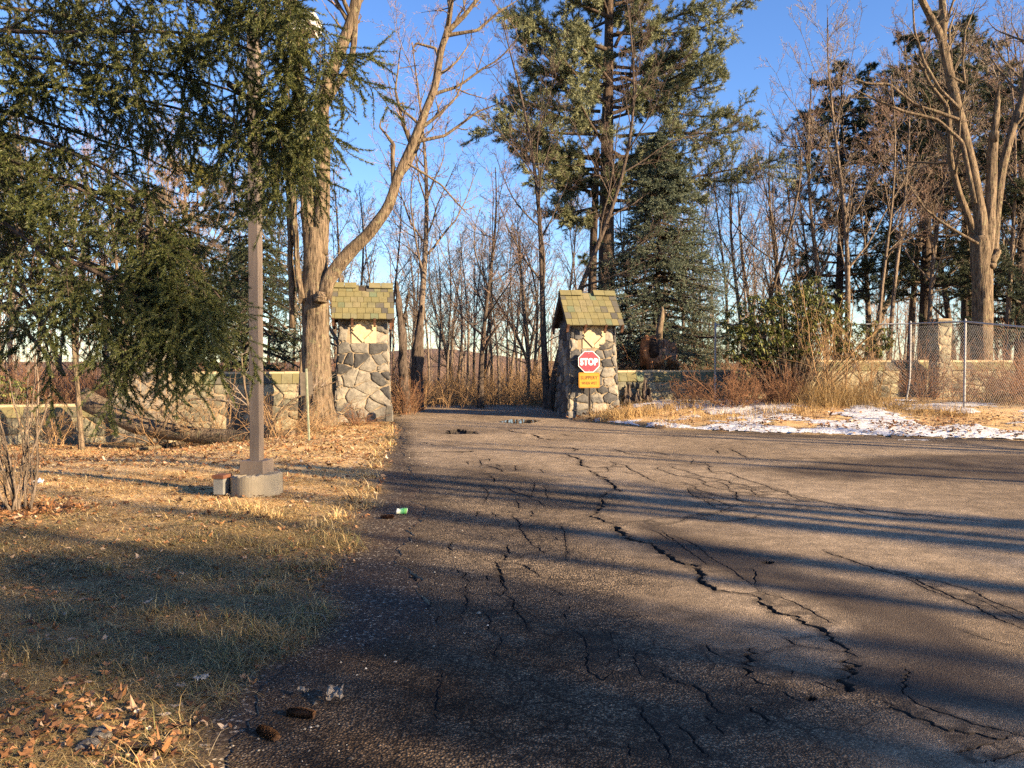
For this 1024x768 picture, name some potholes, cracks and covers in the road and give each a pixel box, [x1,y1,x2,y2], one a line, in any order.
crack [411,430,976,762]
crack [884,668,1024,763]
